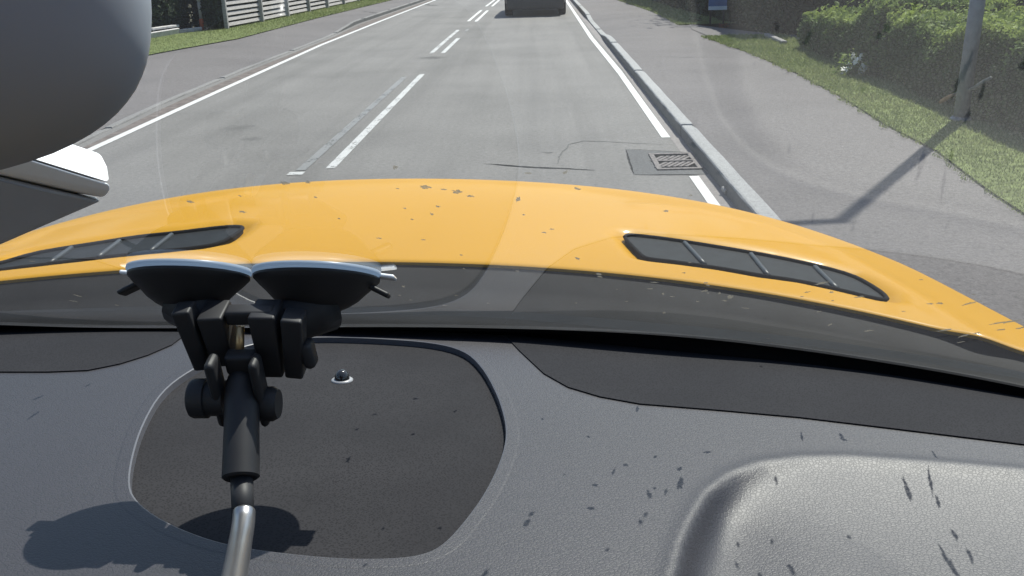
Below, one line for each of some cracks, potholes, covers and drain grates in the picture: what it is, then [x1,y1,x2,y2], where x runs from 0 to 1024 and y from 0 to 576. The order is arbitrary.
drain grate [648,152,704,171]
crack [495,140,649,170]
